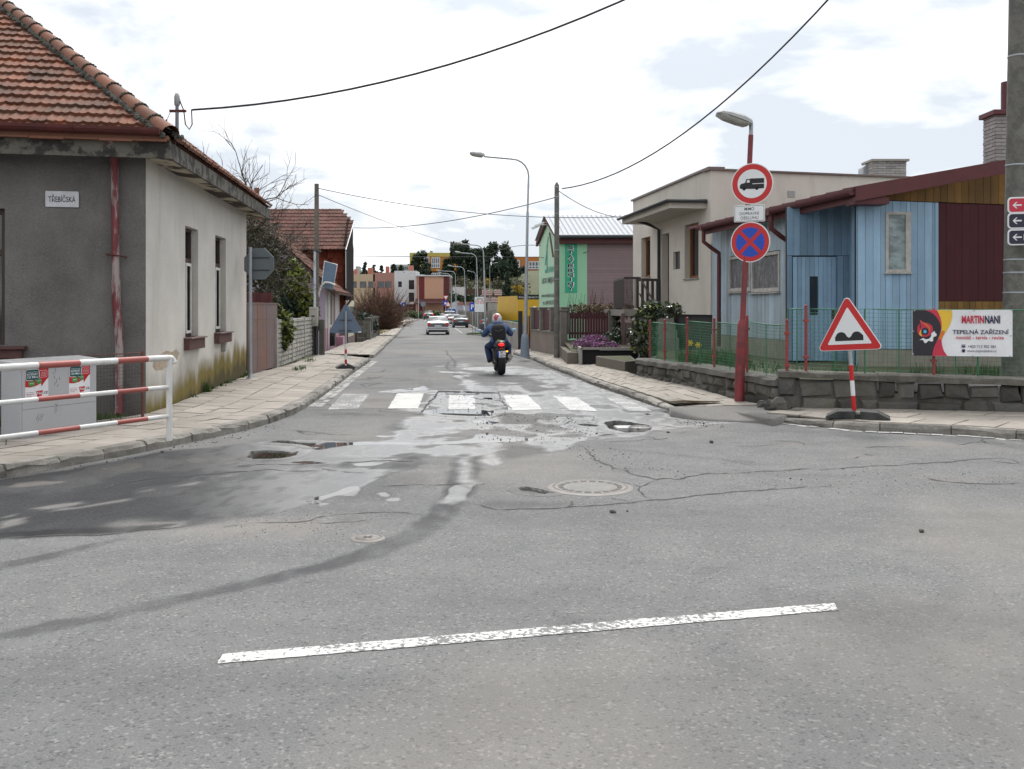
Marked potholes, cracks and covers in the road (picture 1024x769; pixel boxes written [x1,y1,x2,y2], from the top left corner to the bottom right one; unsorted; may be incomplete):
pothole [236,449,308,461]
pothole [596,420,659,434]
manhole cover [548,479,633,496]
utility cover [350,534,385,543]
crack [481,425,1018,510]
